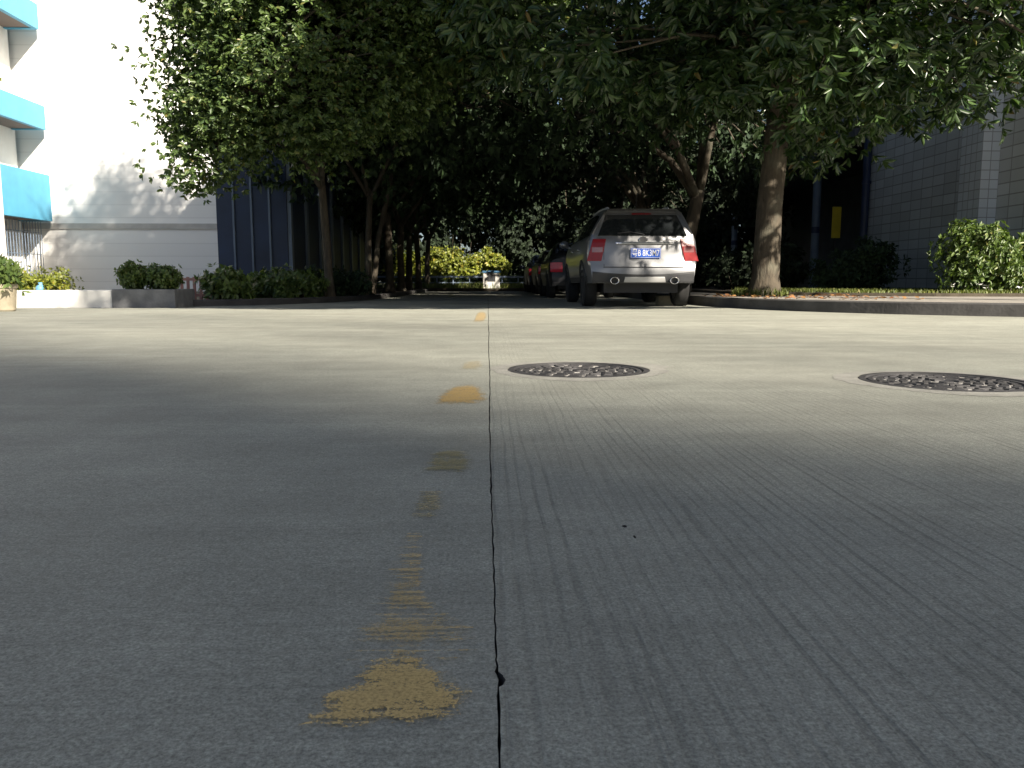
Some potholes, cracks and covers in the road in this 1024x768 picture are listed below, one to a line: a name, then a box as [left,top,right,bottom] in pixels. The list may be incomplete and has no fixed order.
manhole cover [832,371,1024,397]
manhole cover [489,361,672,381]
